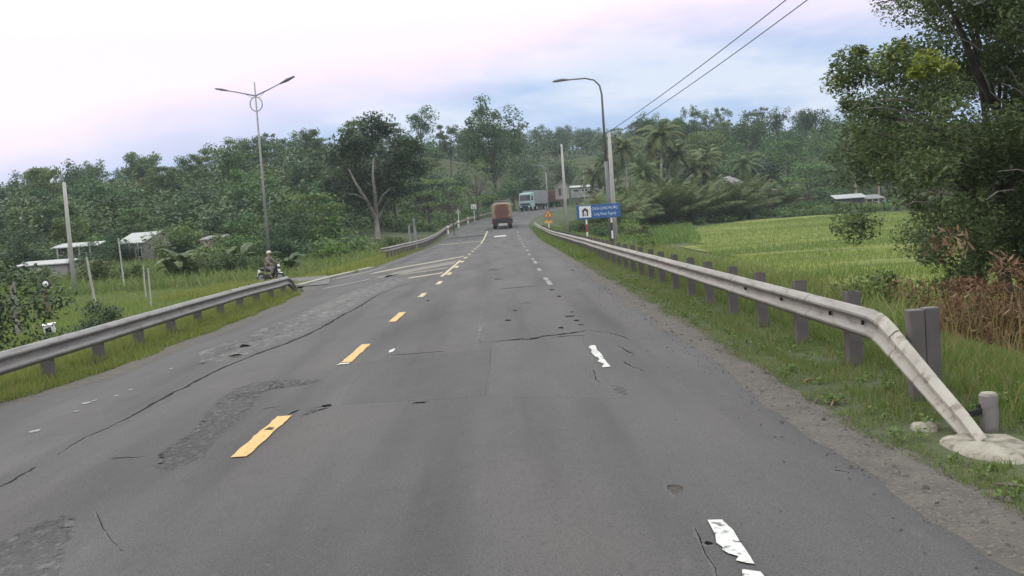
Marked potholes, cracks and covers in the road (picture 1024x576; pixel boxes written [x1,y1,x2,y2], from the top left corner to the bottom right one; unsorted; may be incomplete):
pothole [664,484,685,497]
crack [107,379,328,471]
crack [692,526,720,576]
crack [491,330,644,384]
crack [0,511,122,576]
